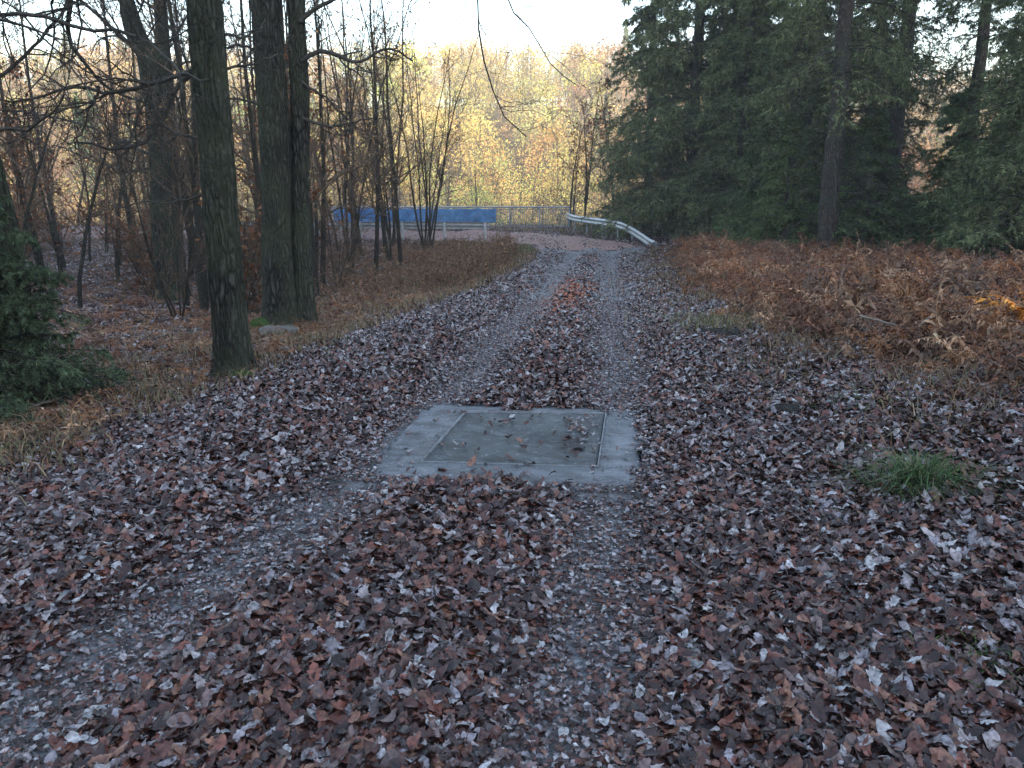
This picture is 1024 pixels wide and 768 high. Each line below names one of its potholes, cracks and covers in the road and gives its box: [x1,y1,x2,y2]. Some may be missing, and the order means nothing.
manhole cover [368,404,643,491]
